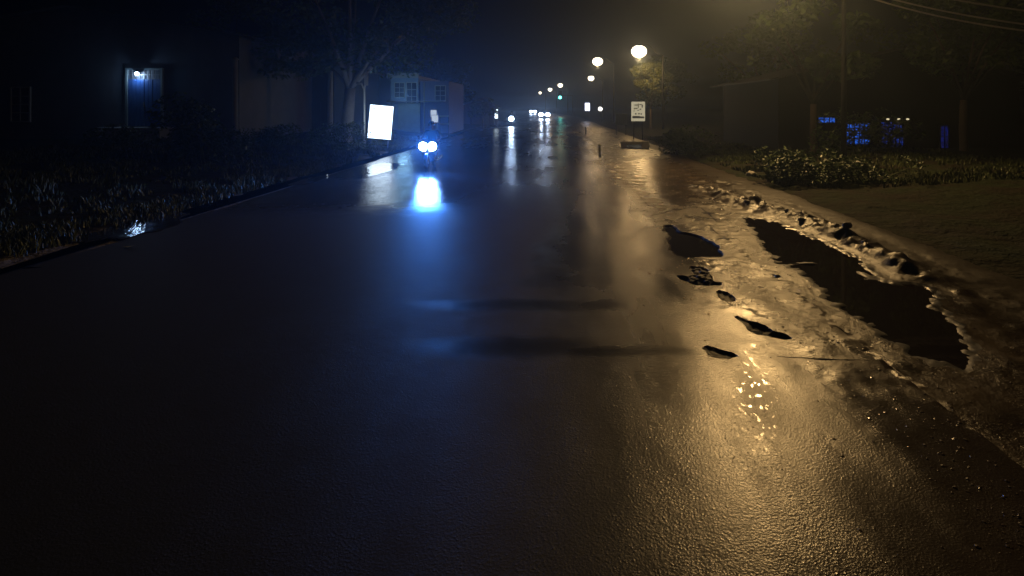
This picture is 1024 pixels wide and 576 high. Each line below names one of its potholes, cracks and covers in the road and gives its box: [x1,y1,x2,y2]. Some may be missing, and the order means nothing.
pothole [735,215,983,373]
pothole [677,266,722,286]
pothole [702,345,738,359]
pothole [661,224,724,258]
pothole [716,290,736,302]
